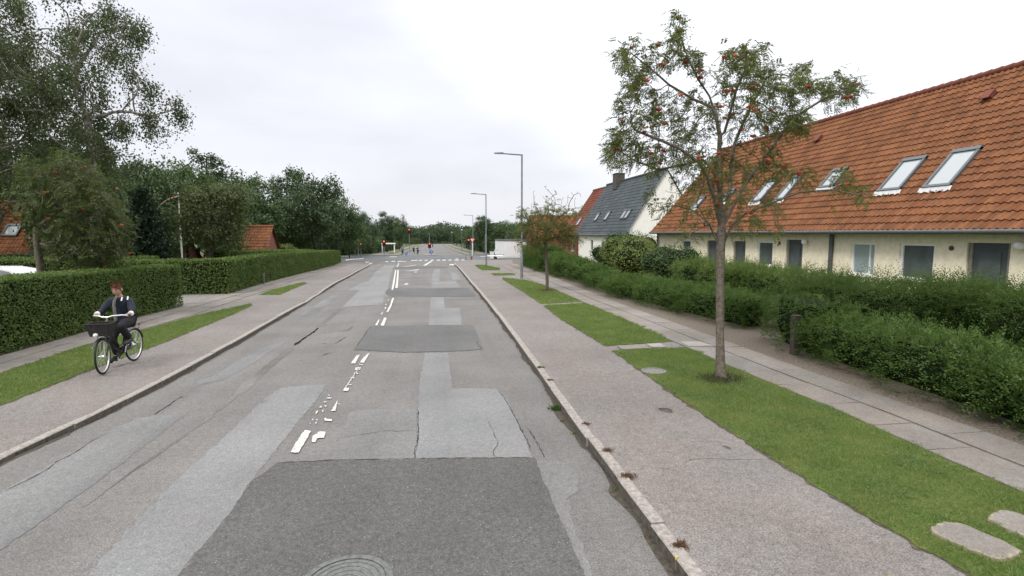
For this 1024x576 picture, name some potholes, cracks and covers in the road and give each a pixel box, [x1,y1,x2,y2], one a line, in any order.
manhole cover [641,367,666,375]
crack [294,326,480,355]
crack [501,394,544,456]
manhole cover [305,554,393,576]
